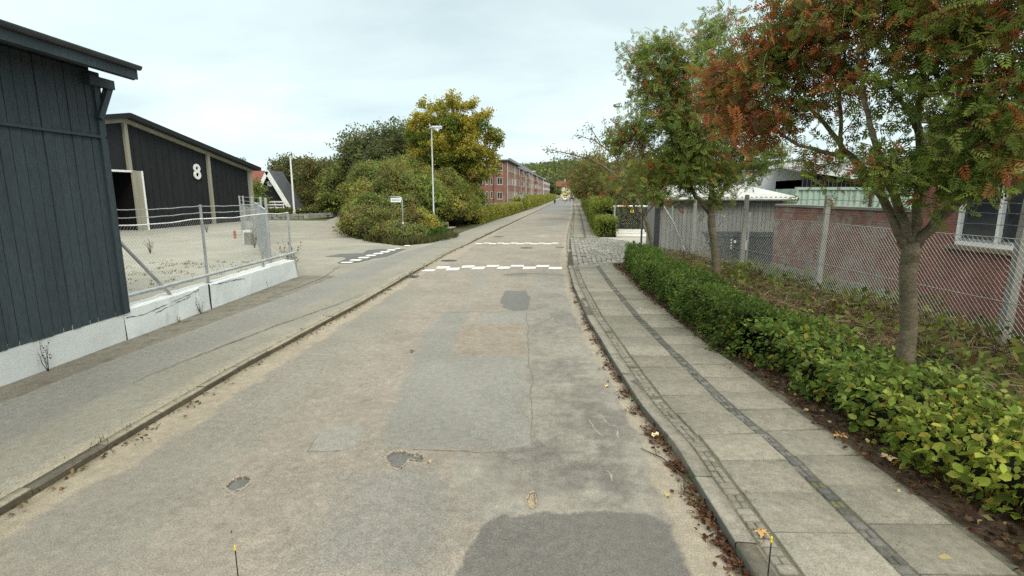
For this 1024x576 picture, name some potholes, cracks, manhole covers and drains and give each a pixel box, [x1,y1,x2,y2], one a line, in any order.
pothole [222,474,255,493]
crack [526,313,557,440]
pothole [383,449,428,470]
pothole [524,490,538,509]
